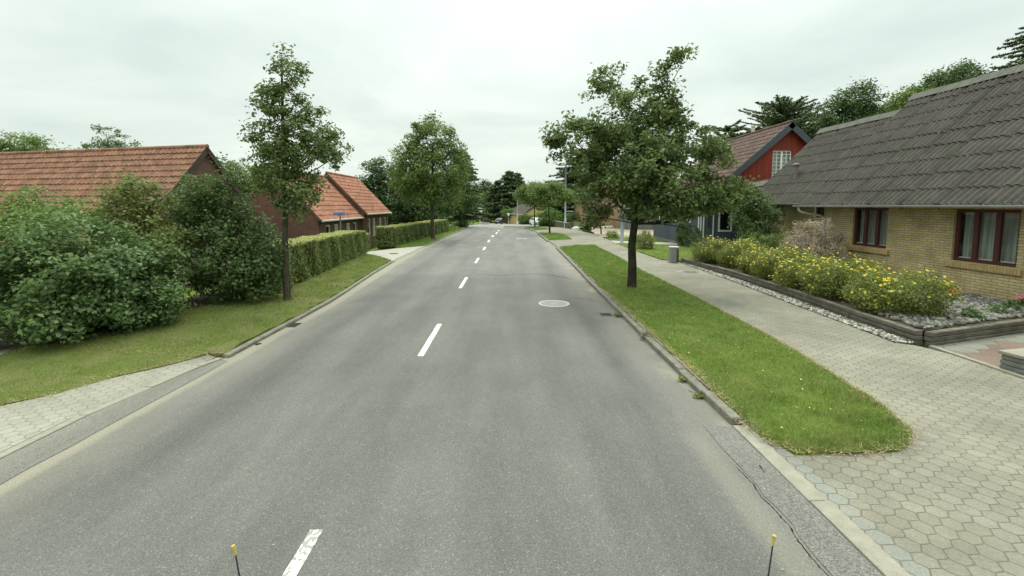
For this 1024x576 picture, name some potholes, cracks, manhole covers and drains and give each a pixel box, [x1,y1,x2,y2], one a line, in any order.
crack [735,465,829,576]
